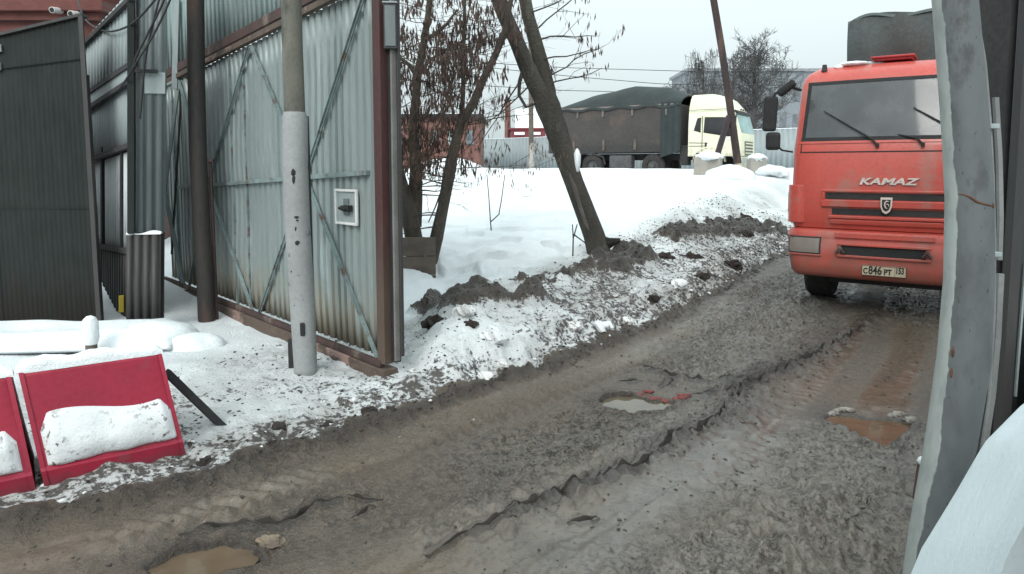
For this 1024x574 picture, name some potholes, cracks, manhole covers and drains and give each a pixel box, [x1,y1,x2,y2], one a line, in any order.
crack [424,320,879,559]
pothole [592,391,683,415]
pothole [136,533,272,574]
crack [179,493,383,540]
pothole [817,413,923,455]
